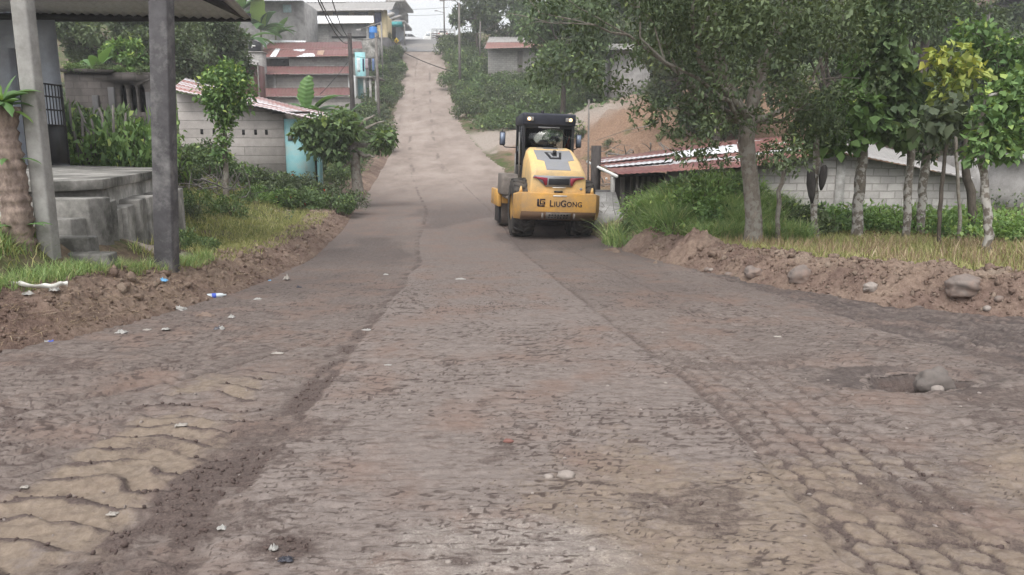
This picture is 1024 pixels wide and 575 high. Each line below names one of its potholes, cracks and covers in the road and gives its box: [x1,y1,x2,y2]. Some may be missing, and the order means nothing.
pothole [859,371,987,394]
